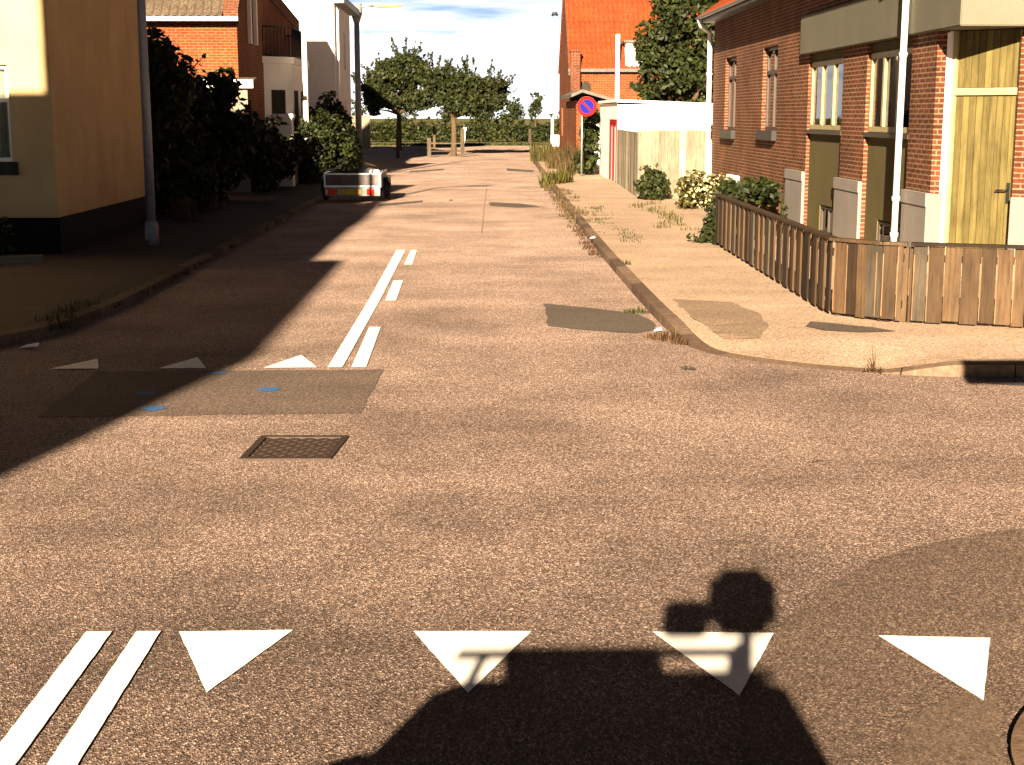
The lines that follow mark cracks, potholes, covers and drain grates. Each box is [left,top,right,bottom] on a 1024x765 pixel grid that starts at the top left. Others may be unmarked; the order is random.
manhole cover [239,435,349,460]
